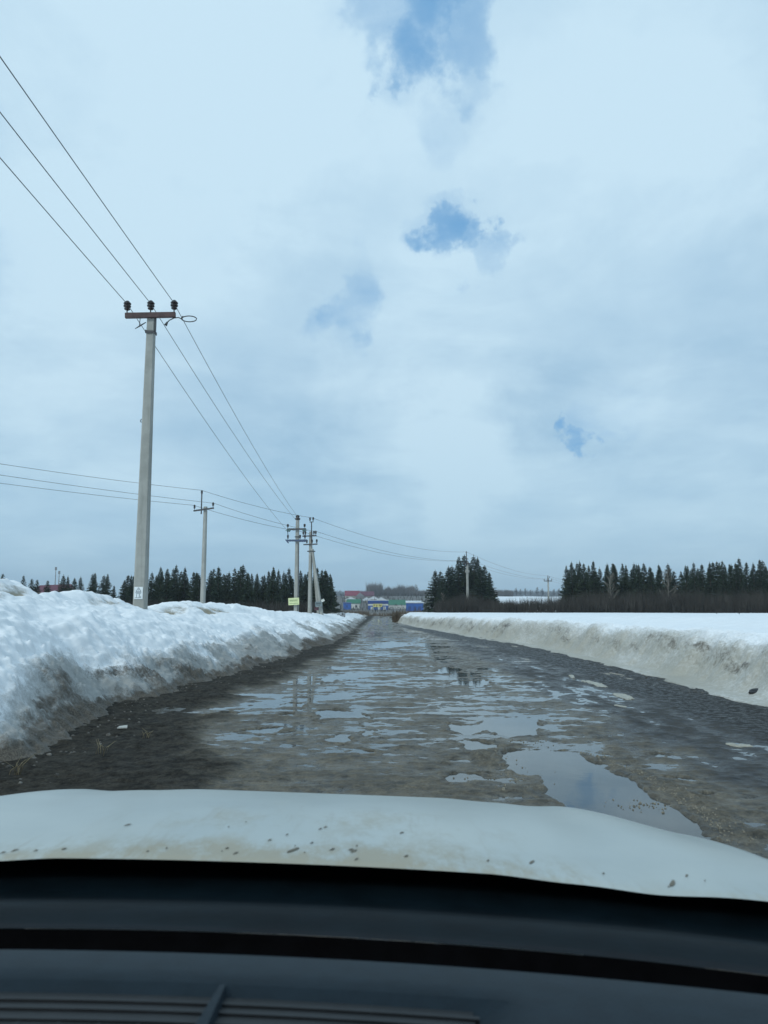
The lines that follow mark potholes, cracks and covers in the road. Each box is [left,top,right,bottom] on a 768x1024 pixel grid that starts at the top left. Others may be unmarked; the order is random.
pothole [436,716,548,738]
pothole [446,679,495,687]
pothole [490,747,731,846]
pothole [429,666,467,674]
